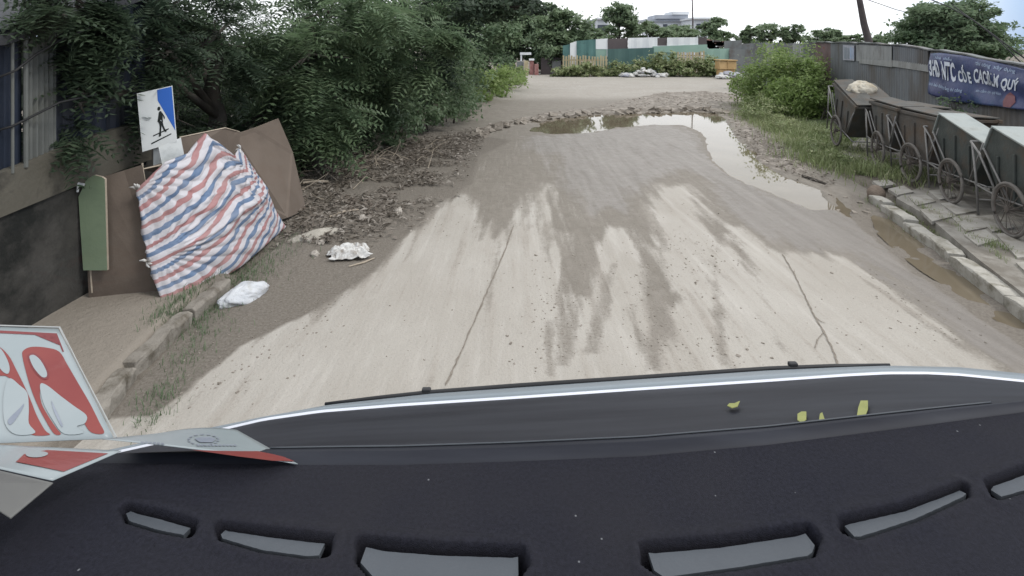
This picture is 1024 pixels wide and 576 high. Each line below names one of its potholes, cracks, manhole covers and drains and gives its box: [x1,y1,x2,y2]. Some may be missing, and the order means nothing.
crack [445,225,514,385]
crack [782,254,838,364]
